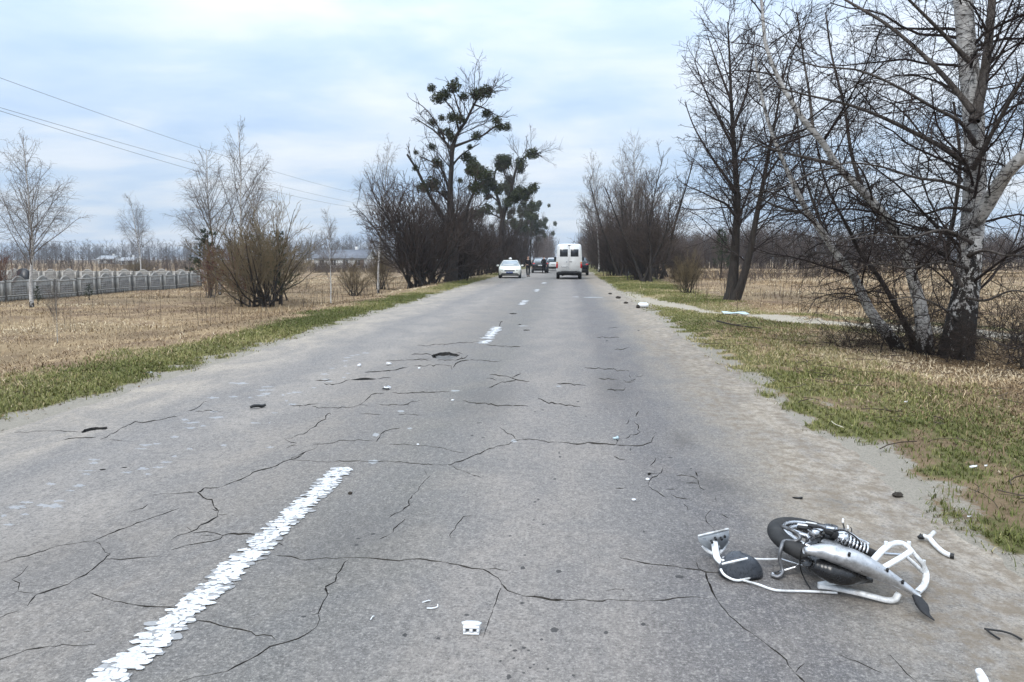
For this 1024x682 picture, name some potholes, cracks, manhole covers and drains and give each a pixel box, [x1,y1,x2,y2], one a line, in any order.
crack [833,652,958,682]
crack [0,341,805,682]
pothole [431,352,459,360]
